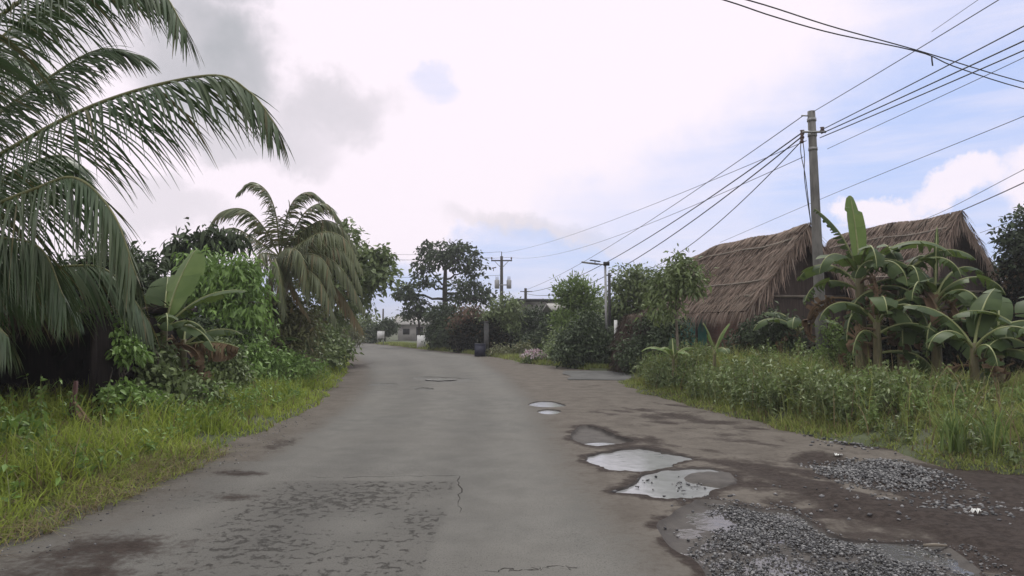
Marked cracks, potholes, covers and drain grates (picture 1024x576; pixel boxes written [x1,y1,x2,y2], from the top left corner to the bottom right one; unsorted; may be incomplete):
crack [313,475,463,512]
pothole [584,447,694,466]
pothole [569,425,634,445]
pothole [609,467,737,493]
pothole [656,499,982,576]
